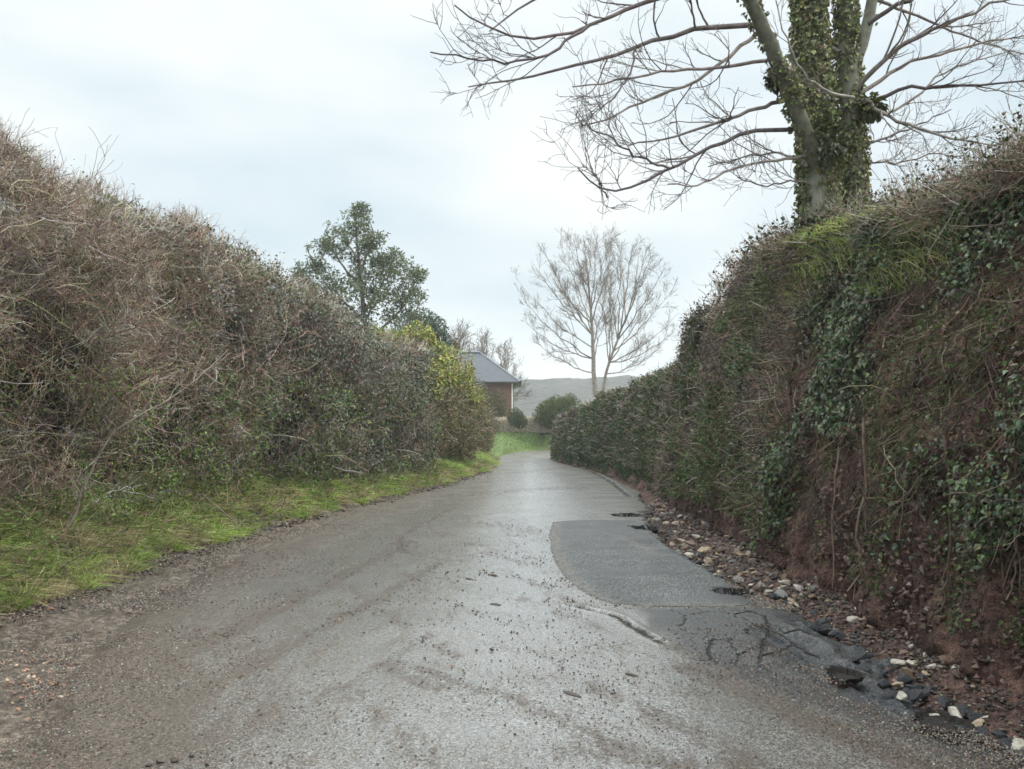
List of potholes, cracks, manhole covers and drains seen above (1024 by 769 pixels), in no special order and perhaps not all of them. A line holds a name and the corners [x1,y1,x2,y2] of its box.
pothole [824,665,866,684]
pothole [714,587,758,598]
pothole [631,525,659,534]
crack [578,607,820,679]
